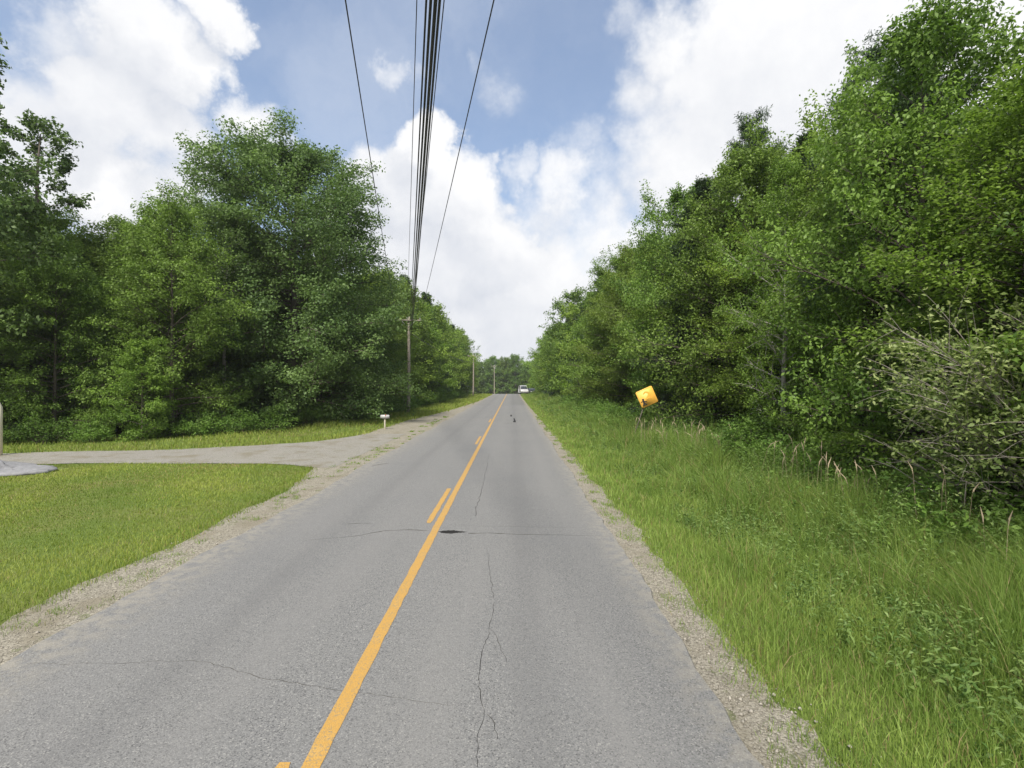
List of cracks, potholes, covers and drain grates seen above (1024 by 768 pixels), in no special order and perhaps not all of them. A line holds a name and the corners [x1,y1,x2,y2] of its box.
crack [477,561,507,767]
crack [44,660,444,705]
crack [315,523,587,540]
